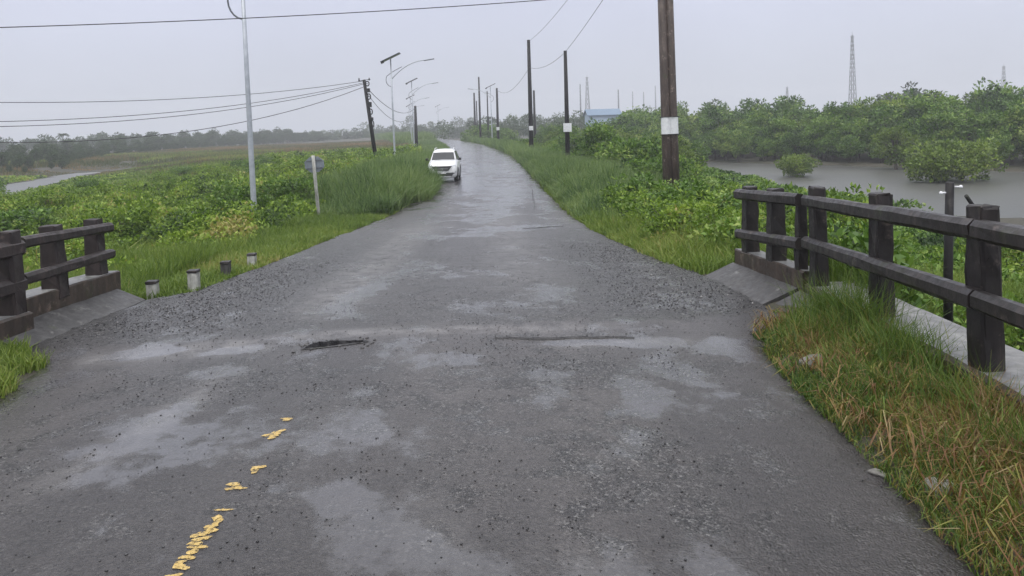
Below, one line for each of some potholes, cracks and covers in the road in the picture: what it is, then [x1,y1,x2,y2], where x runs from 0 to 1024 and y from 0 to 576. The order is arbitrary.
pothole [291,337,376,353]
